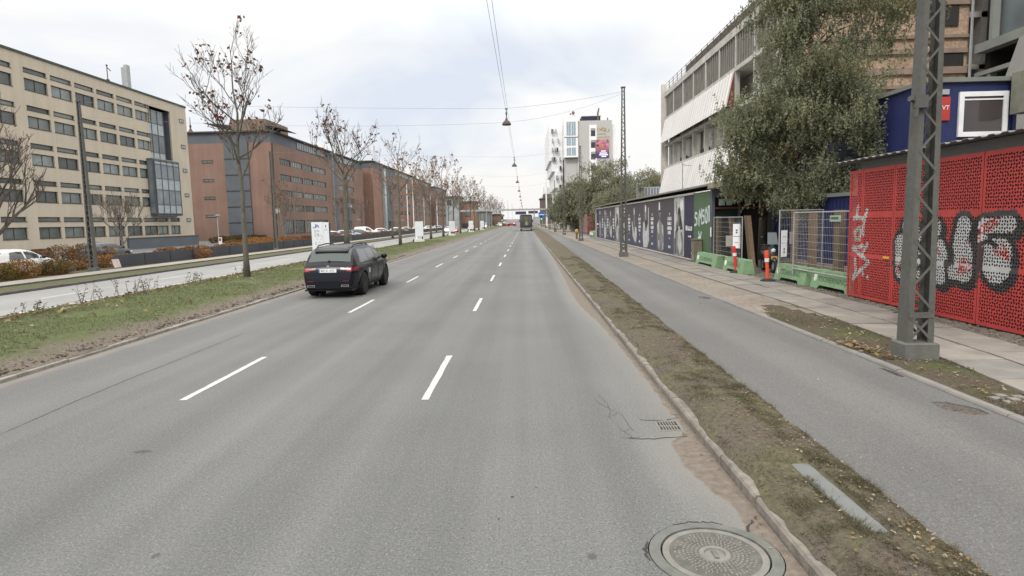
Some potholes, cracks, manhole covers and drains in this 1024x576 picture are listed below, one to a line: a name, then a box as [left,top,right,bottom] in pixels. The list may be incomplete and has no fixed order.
crack [600,397,684,439]
drain grate [654,420,684,431]
manhole cover [649,523,786,576]
